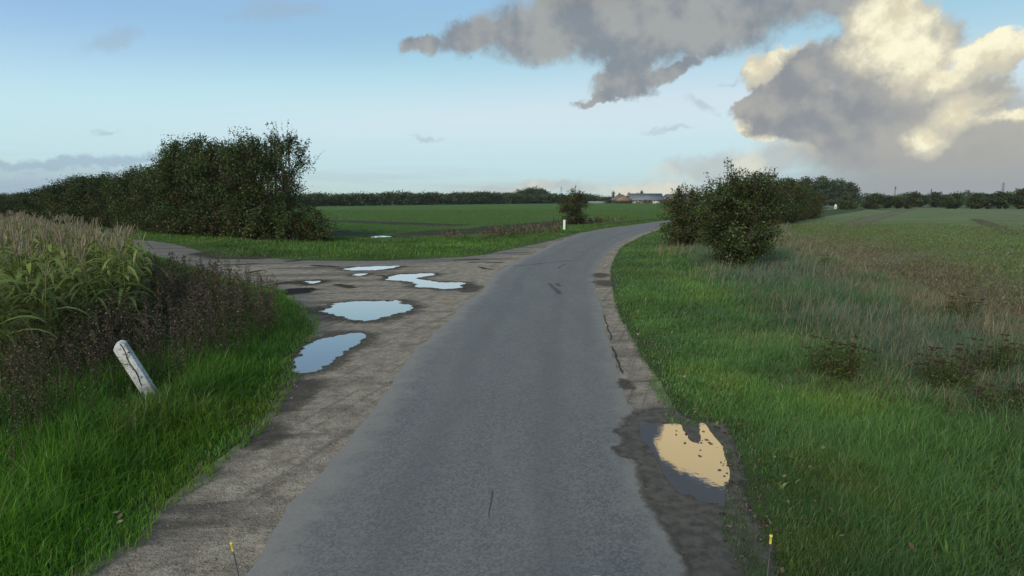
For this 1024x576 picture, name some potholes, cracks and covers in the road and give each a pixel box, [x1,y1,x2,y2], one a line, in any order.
pothole [379,272,471,290]
pothole [307,299,422,323]
crack [604,316,623,373]
pothole [281,330,376,377]
pothole [611,407,781,576]
